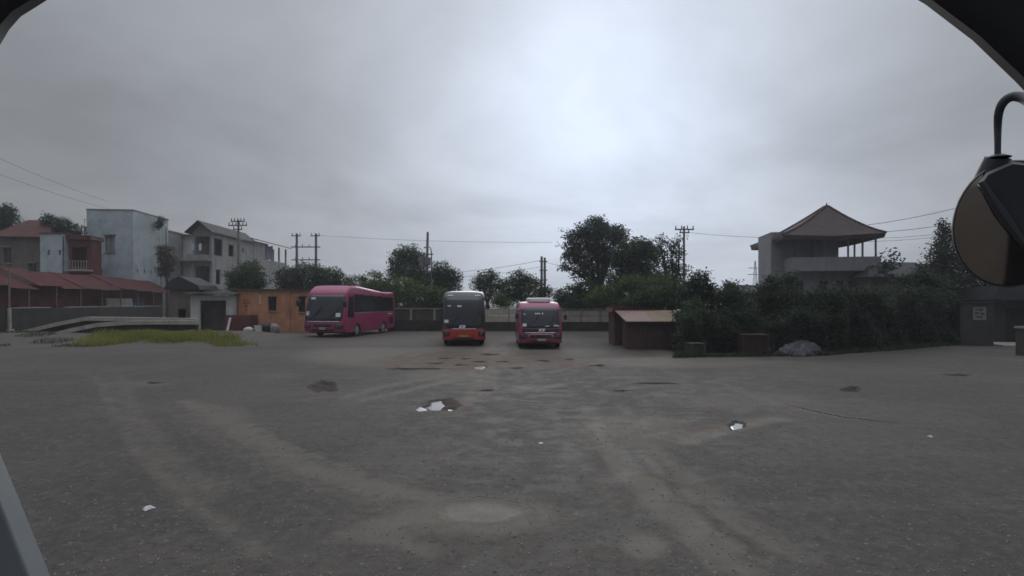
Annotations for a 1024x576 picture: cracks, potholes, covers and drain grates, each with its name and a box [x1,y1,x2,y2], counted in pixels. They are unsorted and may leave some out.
pothole [721,419,753,432]
crack [783,403,892,423]
pothole [301,380,341,393]
pothole [416,398,467,412]
